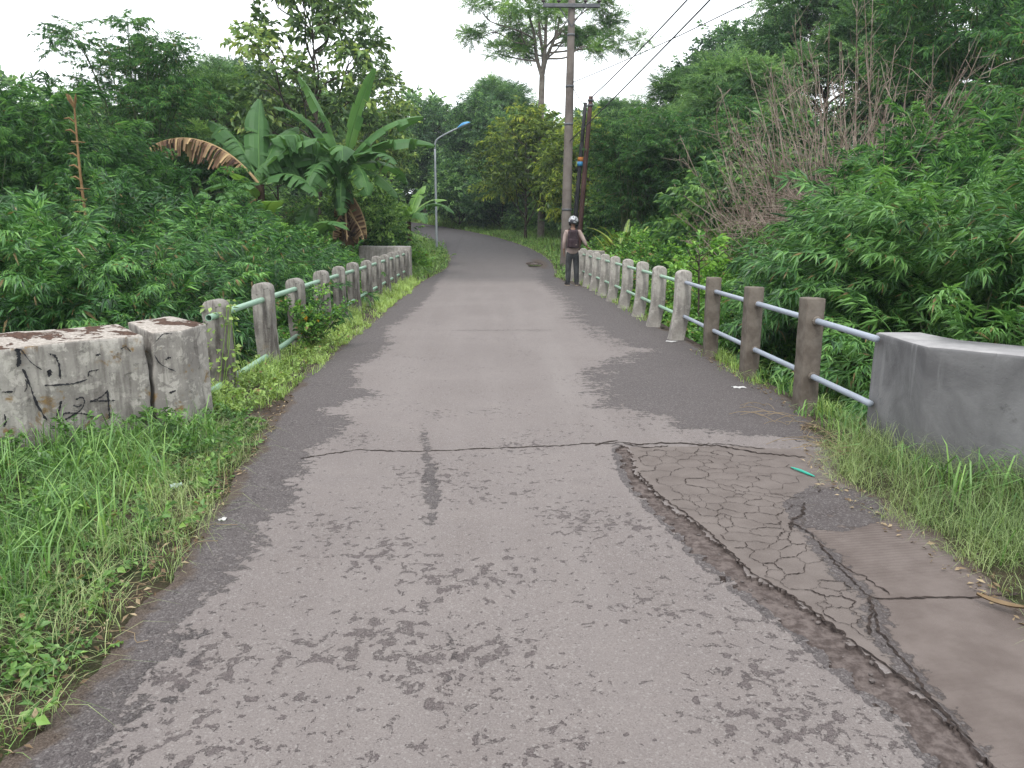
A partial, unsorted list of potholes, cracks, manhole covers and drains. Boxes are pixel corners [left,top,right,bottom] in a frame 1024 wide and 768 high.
crack [303,440,974,742]
